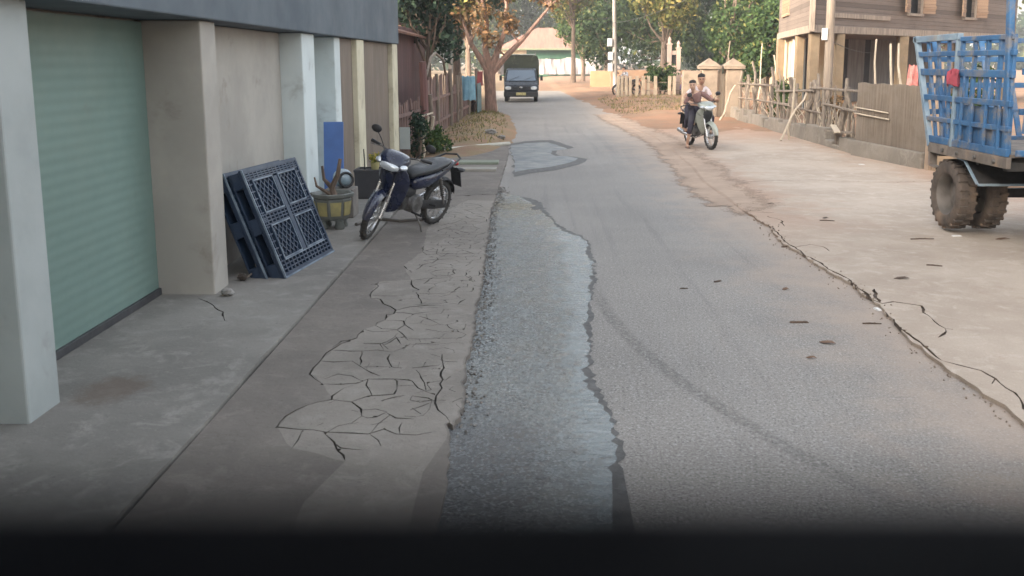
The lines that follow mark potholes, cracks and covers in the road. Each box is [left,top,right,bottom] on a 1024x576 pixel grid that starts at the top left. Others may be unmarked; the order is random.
crack [275,203,487,460]
crack [765,212,1024,410]
